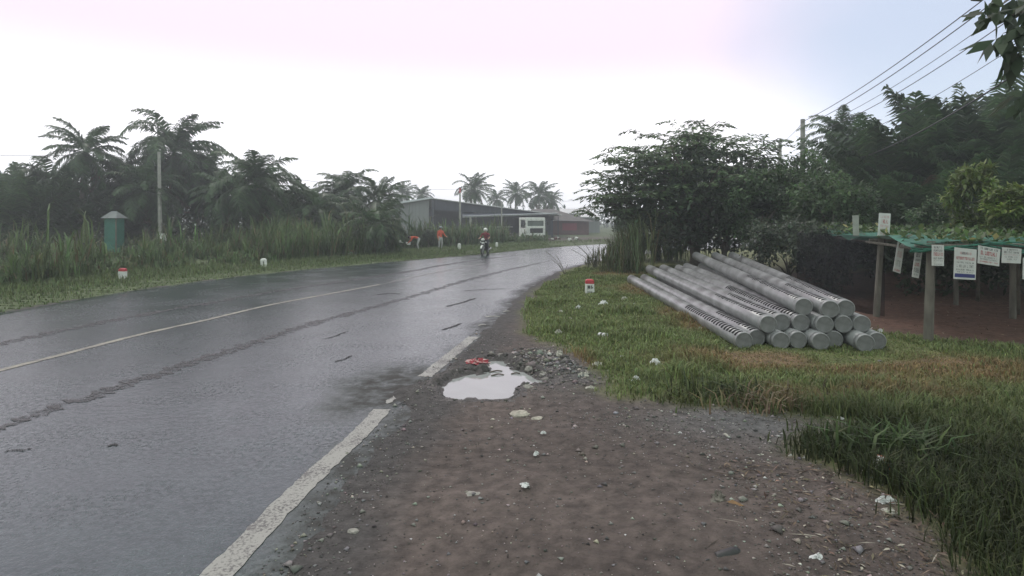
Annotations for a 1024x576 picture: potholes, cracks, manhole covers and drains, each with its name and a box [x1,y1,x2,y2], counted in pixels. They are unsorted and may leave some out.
pothole [426,352,565,402]
crack [442,289,486,330]
